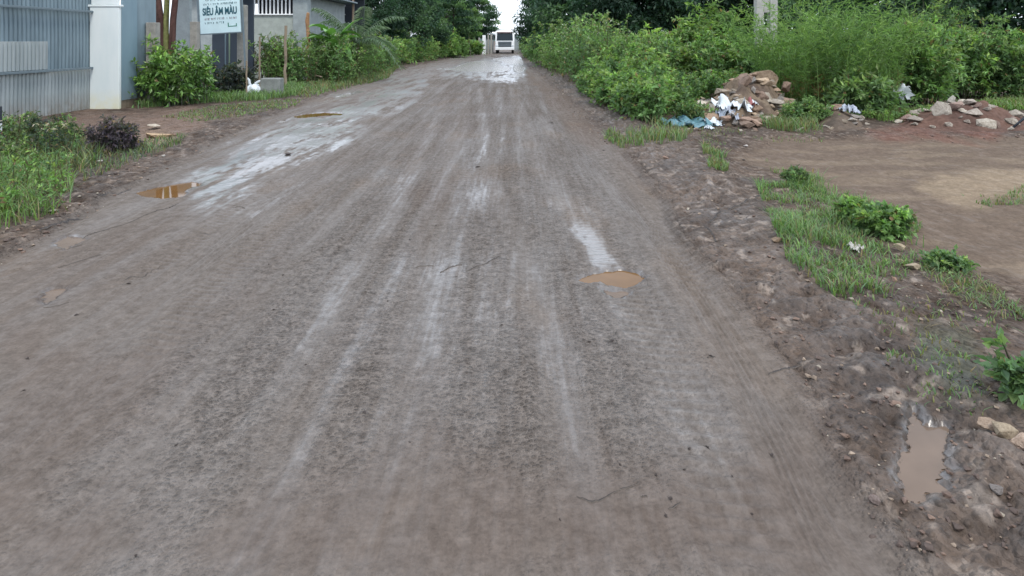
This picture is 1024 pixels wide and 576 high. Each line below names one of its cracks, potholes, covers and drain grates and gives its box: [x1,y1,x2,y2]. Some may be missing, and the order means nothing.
pothole [136,182,200,199]
crack [416,256,500,273]
crack [38,203,179,268]
pothole [578,270,644,288]
crack [577,482,647,503]
pothole [604,289,629,298]
pothole [897,412,952,504]
